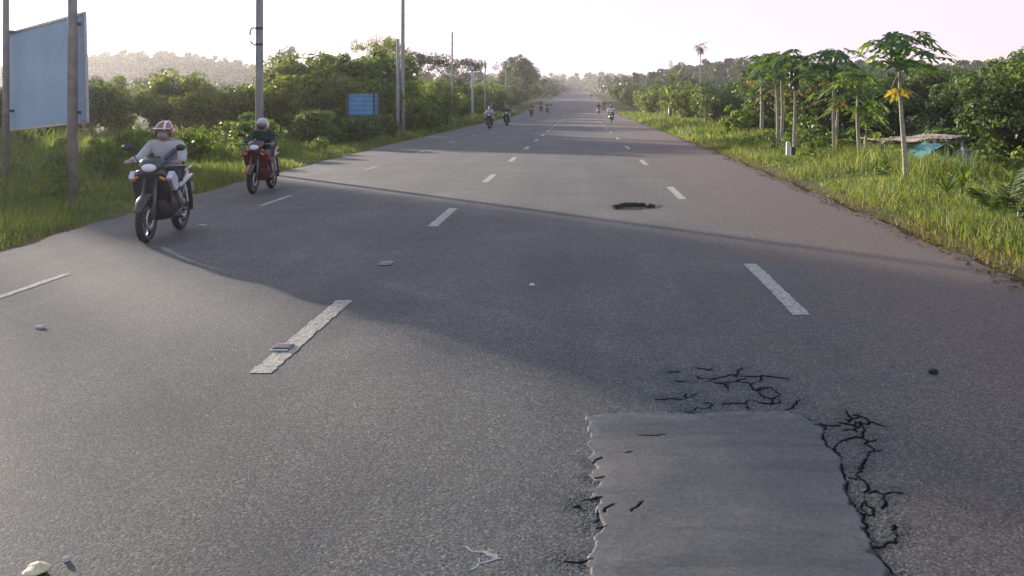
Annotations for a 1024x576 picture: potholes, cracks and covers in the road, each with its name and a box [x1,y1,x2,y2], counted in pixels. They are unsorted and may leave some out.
crack [565,434,665,564]
crack [656,367,904,576]
pothole [611,202,662,210]
